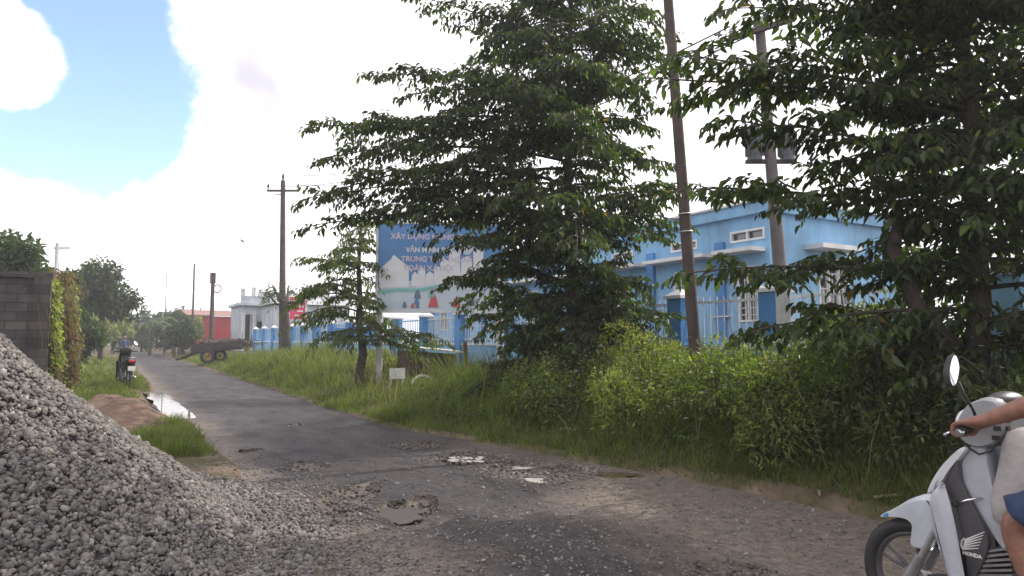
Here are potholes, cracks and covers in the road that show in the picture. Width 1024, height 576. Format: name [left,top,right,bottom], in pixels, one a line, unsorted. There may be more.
pothole [372,494,440,526]
pothole [415,449,516,468]
pothole [378,440,447,451]
